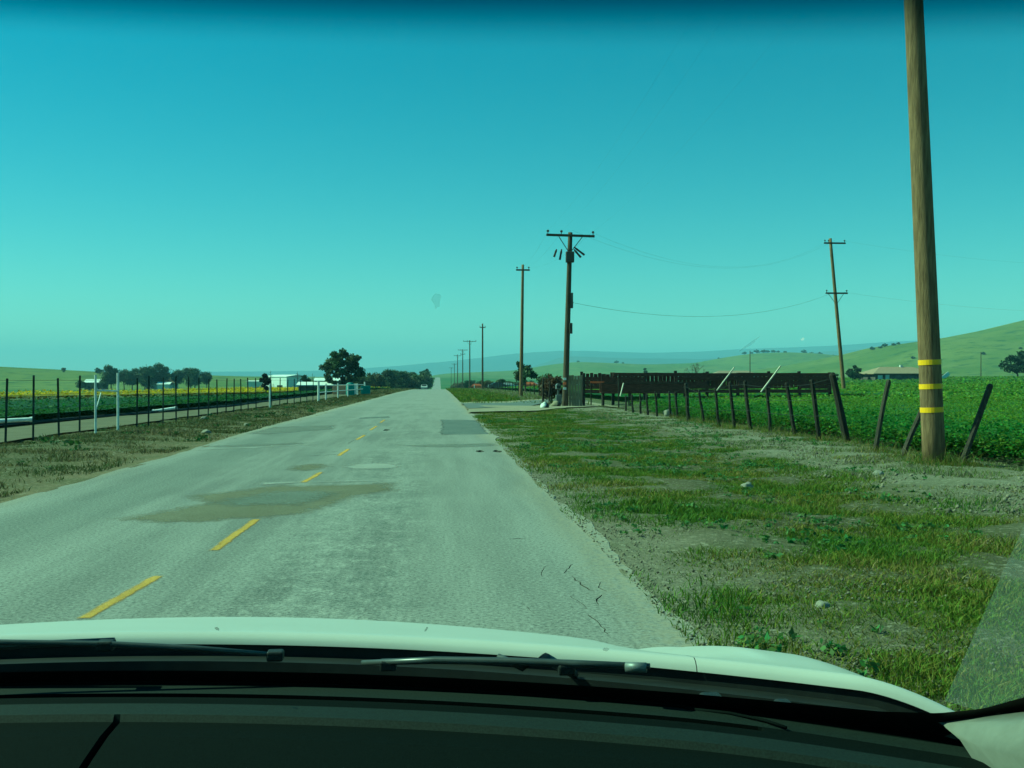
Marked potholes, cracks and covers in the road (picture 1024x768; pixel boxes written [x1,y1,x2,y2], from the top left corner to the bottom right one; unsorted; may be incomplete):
crack [528,564,608,634]
